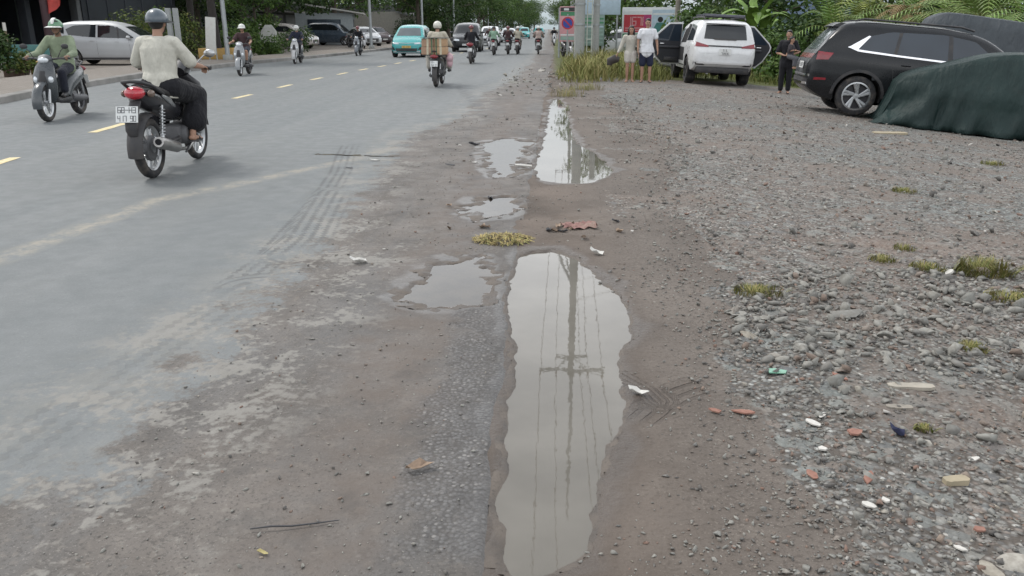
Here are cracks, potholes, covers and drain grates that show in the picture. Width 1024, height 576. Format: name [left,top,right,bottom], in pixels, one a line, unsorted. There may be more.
pothole [532,98,614,184]
pothole [484,250,635,576]
pothole [452,193,530,223]
pothole [469,138,539,179]
pothole [387,252,506,312]
